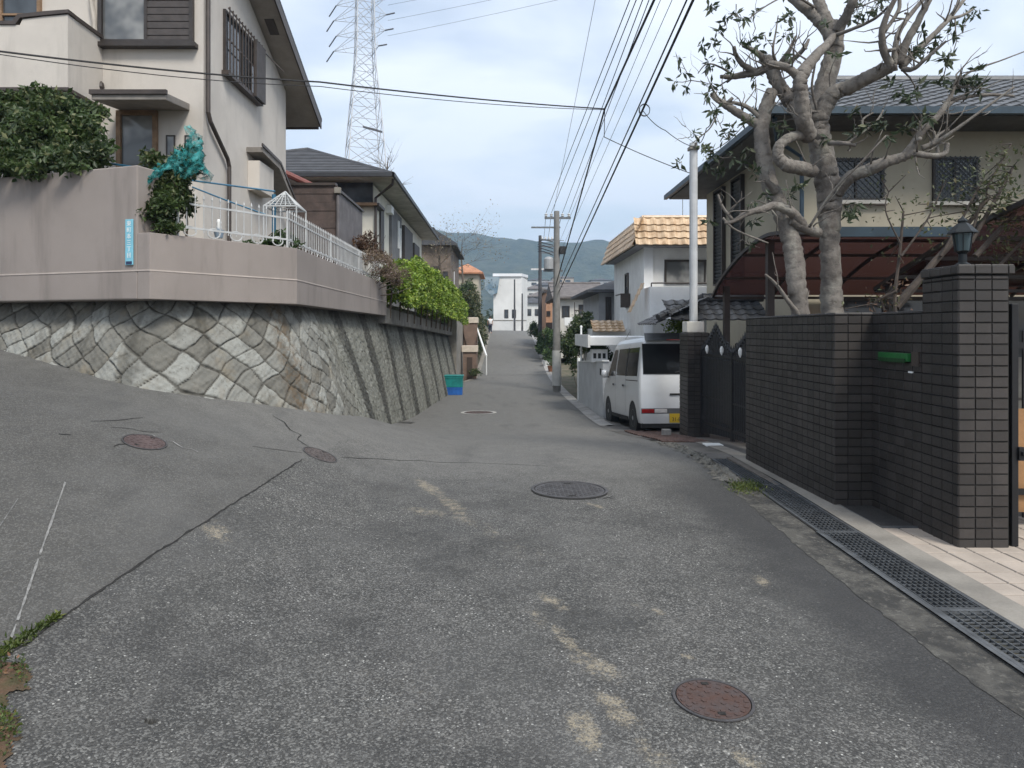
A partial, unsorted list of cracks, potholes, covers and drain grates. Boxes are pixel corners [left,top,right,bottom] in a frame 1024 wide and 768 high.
drain grate [756,485,858,531]
manhole cover [303,447,337,463]
drain grate [713,459,782,485]
drain grate [934,609,1024,669]
manhole cover [121,434,168,450]
drain grate [820,531,988,609]
manhole cover [531,481,608,499]
manhole cover [672,678,755,722]
